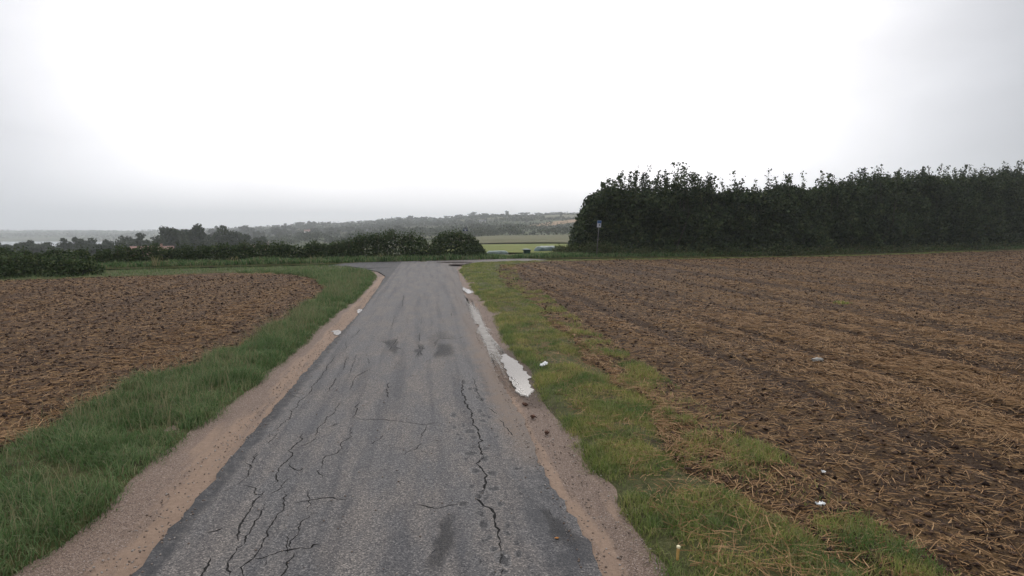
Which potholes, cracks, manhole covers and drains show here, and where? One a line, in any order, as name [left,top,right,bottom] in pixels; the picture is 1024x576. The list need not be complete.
crack [201,329,438,576]
crack [461,377,514,572]
